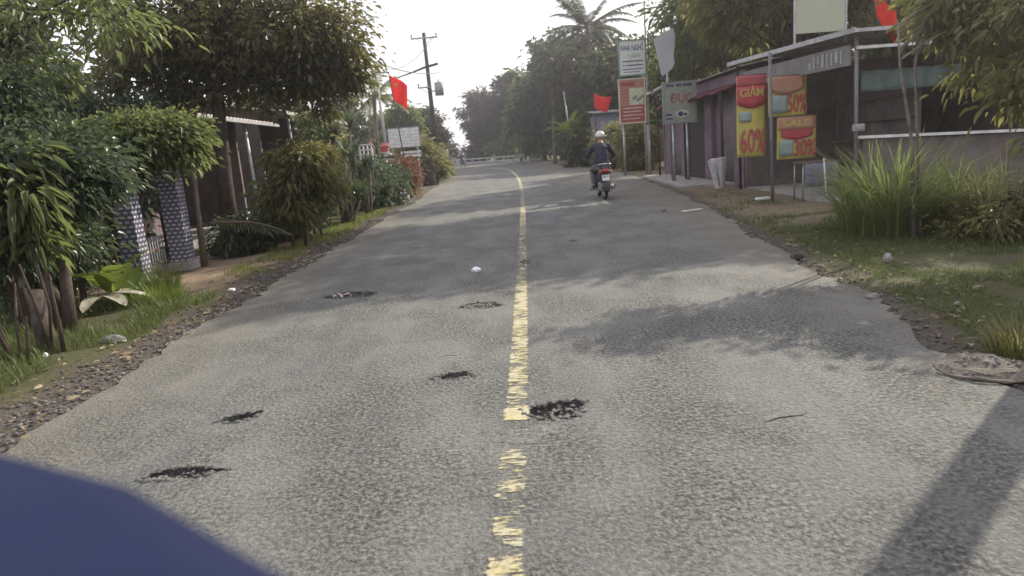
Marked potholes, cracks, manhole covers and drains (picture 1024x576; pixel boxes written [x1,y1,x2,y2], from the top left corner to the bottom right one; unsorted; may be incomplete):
pothole [457,300,505,309]
pothole [518,397,590,421]
crack [765,413,807,423]
pothole [430,369,476,381]
pothole [322,290,378,299]
pothole [133,463,233,483]
pothole [212,409,266,424]
